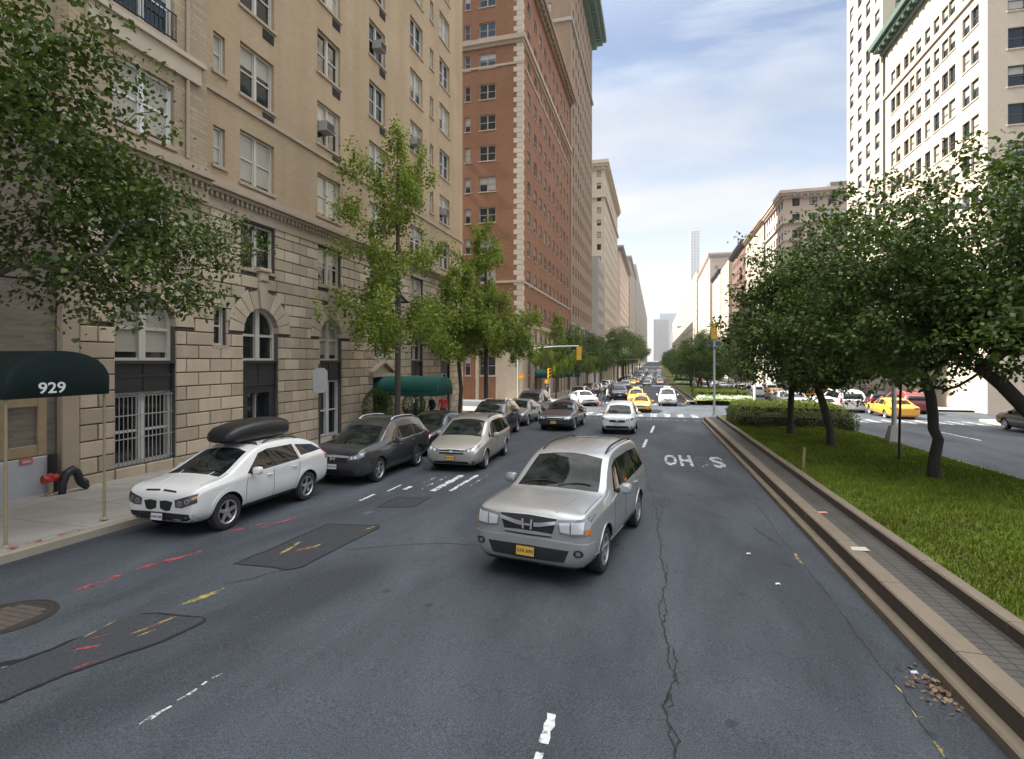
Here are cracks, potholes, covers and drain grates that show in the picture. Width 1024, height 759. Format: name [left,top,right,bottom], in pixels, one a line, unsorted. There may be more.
crack [648,484,681,759]
manhole cover [0,599,60,634]
